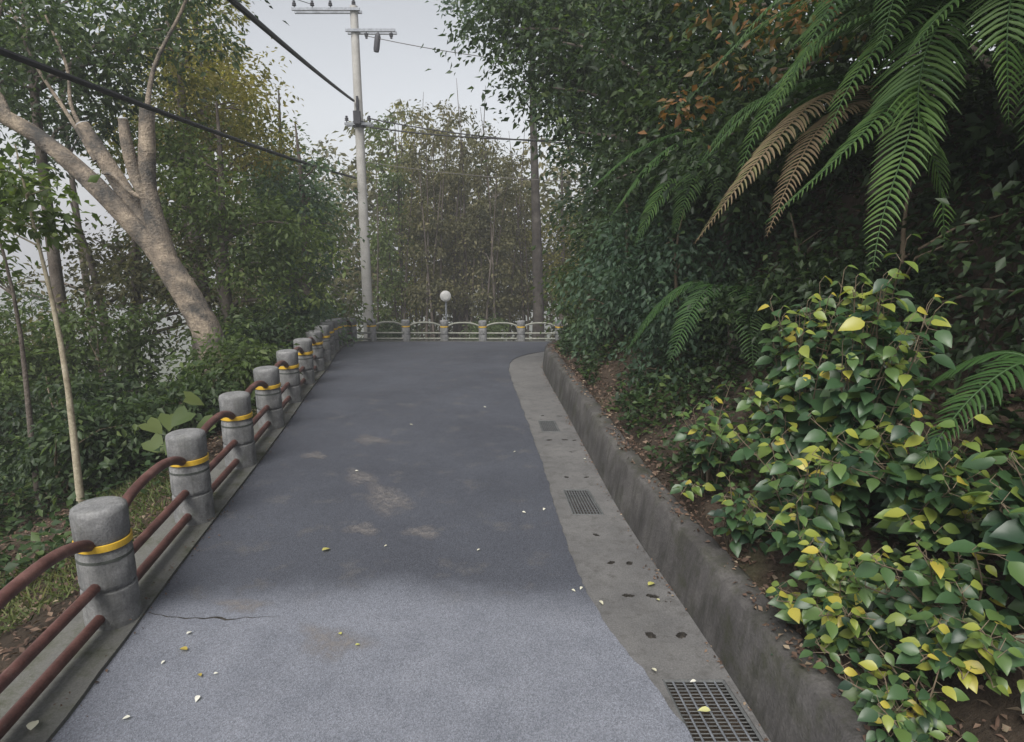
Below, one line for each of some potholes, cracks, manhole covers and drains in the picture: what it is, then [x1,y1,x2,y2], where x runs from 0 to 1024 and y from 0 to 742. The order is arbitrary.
drain grate [538,420,561,432]
drain grate [563,489,604,515]
crack [148,612,279,621]
drain grate [662,679,765,742]
